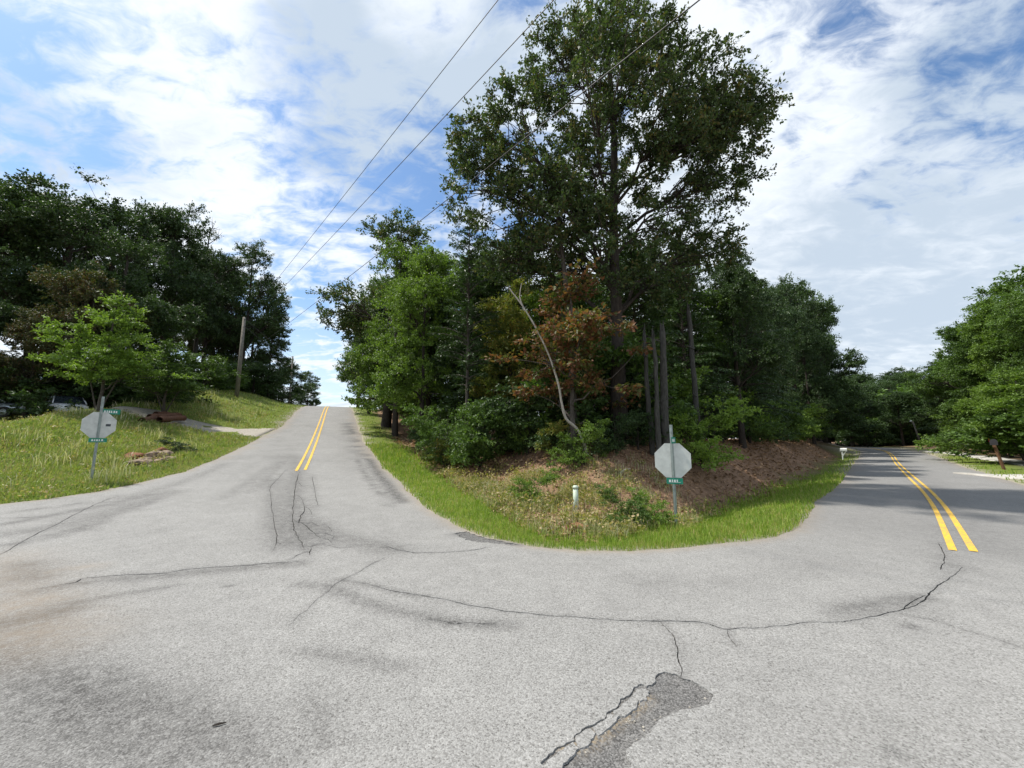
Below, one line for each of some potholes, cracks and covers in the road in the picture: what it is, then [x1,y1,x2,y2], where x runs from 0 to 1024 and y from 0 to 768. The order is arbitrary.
pothole [542,673,713,768]
crack [666,545,960,675]
crack [269,476,332,553]
